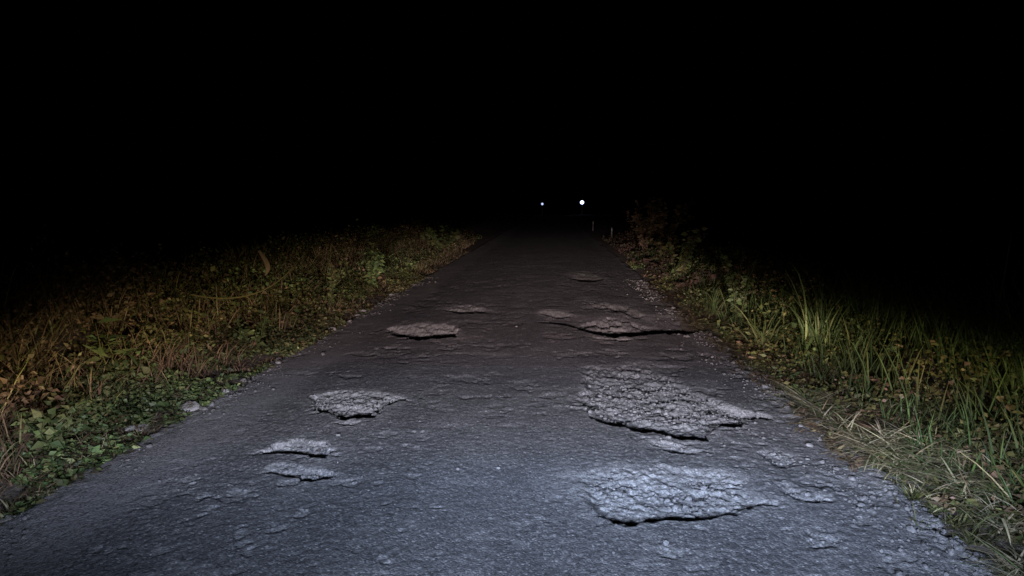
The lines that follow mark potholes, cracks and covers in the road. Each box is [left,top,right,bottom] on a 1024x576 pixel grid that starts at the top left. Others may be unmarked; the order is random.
pothole [645,437,709,455]
pothole [309,390,409,420]
pothole [387,321,462,340]
pothole [571,317,684,338]
pothole [574,463,788,527]
pothole [260,459,338,482]
pothole [563,271,607,282]
pothole [259,434,337,458]
pothole [539,309,572,319]
